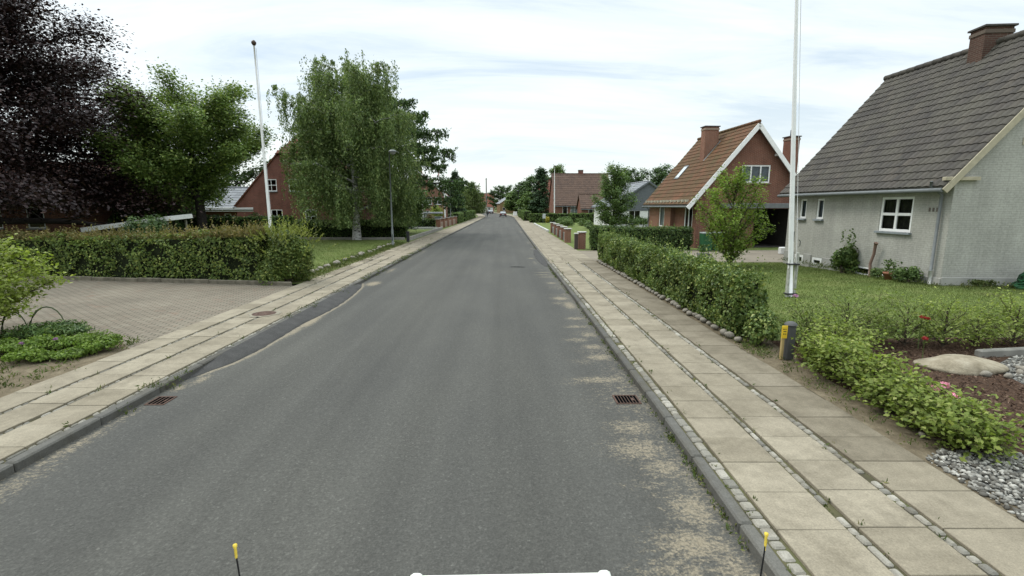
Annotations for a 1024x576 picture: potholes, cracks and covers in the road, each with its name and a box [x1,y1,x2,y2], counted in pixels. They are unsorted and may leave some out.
drain grate [612,395,642,404]
drain grate [144,396,177,405]
